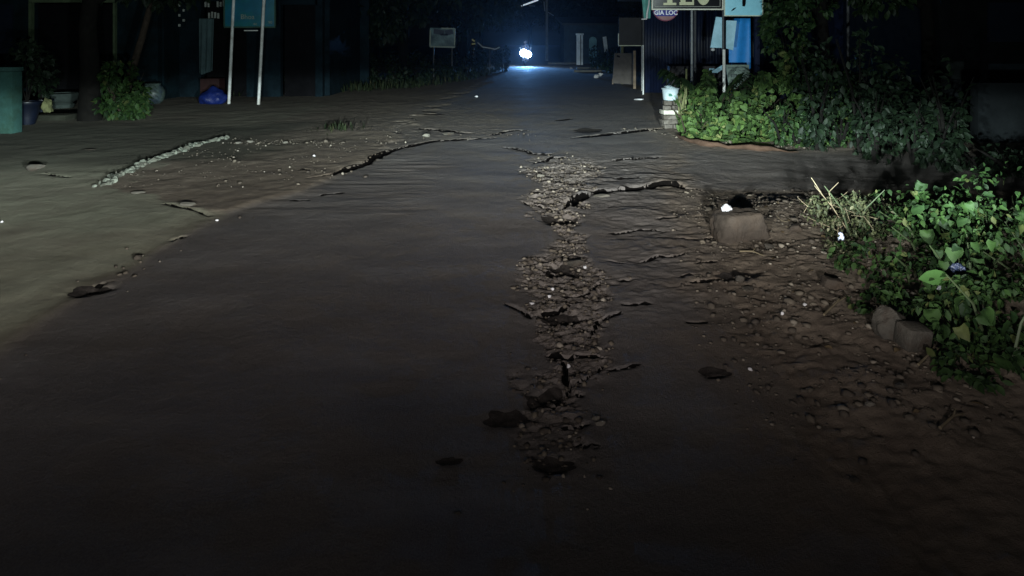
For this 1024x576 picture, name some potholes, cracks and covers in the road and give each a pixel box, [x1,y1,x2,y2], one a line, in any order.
crack [300,114,570,176]
crack [556,119,664,138]
pothole [67,286,112,298]
crack [523,157,701,214]
crack [505,281,651,449]
crack [608,217,718,283]
